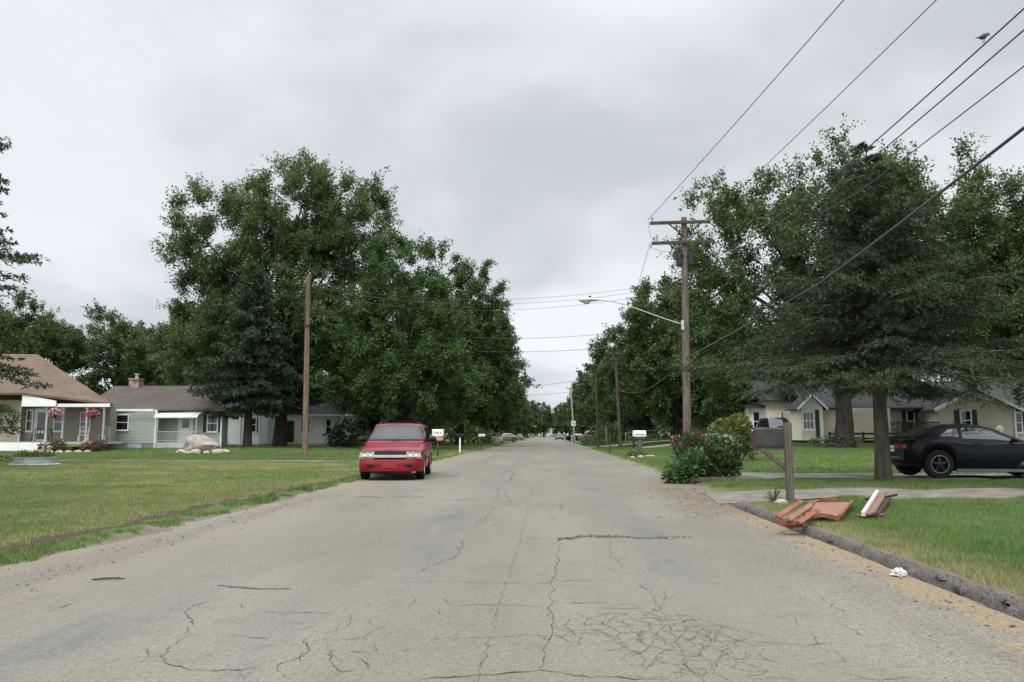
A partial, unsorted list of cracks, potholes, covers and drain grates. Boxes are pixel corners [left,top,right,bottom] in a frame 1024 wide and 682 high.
crack [144,585,291,680]
crack [266,607,384,676]
crack [408,473,900,682]
